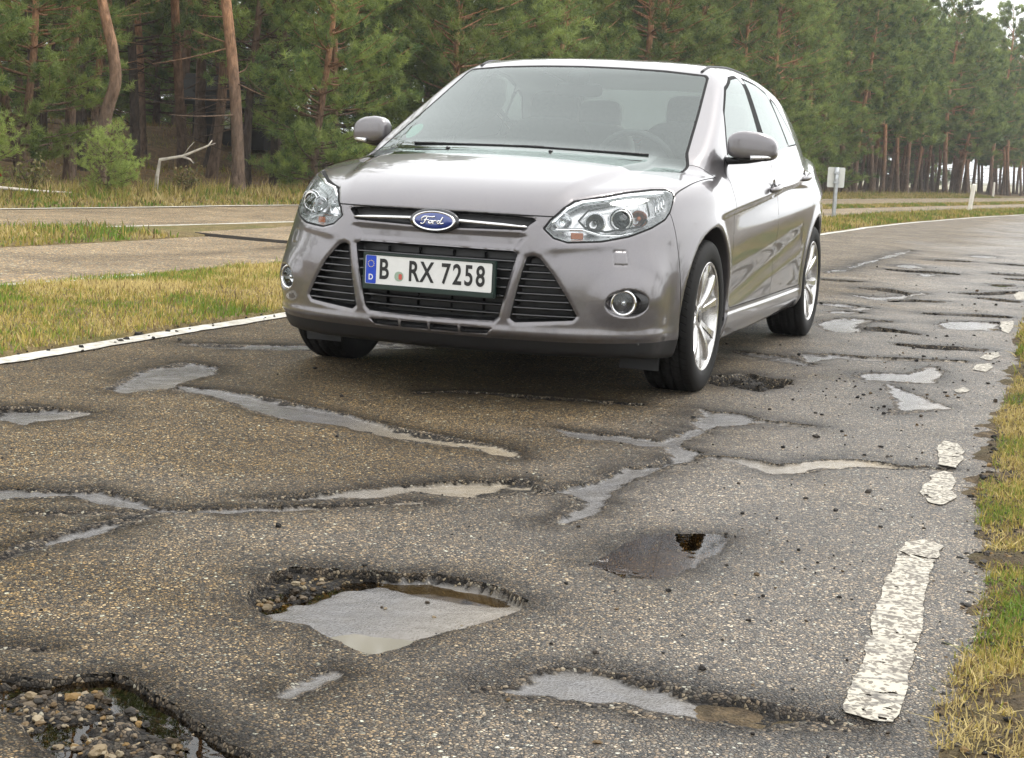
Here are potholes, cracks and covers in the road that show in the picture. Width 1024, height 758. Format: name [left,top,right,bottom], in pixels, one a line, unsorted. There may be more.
pothole [882,384,953,415]
pothole [0,670,261,758]
pothole [244,567,527,654]
pothole [937,321,1002,331]
pothole [850,366,946,384]
pothole [589,533,729,579]
pothole [707,374,794,392]
pothole [814,317,872,333]
pothole [100,362,219,393]
pothole [0,406,92,425]
crack [732,250,1024,367]
